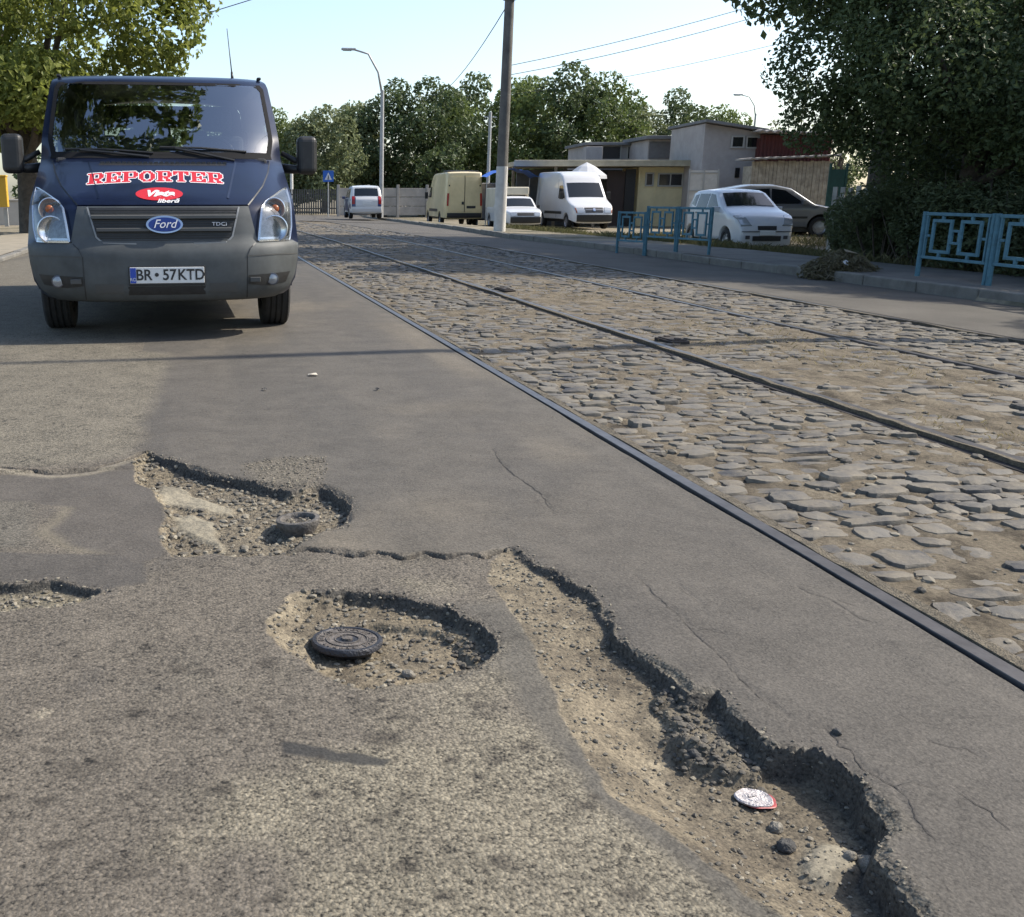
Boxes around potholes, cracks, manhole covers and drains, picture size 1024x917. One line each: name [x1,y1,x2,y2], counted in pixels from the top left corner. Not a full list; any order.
crack [641,580,779,713]
pothole [486,547,921,917]
pothole [263,589,500,691]
manhole cover [311,626,383,660]
pothole [132,449,353,558]
pothole [0,579,105,613]
manhole cover [276,512,320,538]
crack [823,726,932,836]
